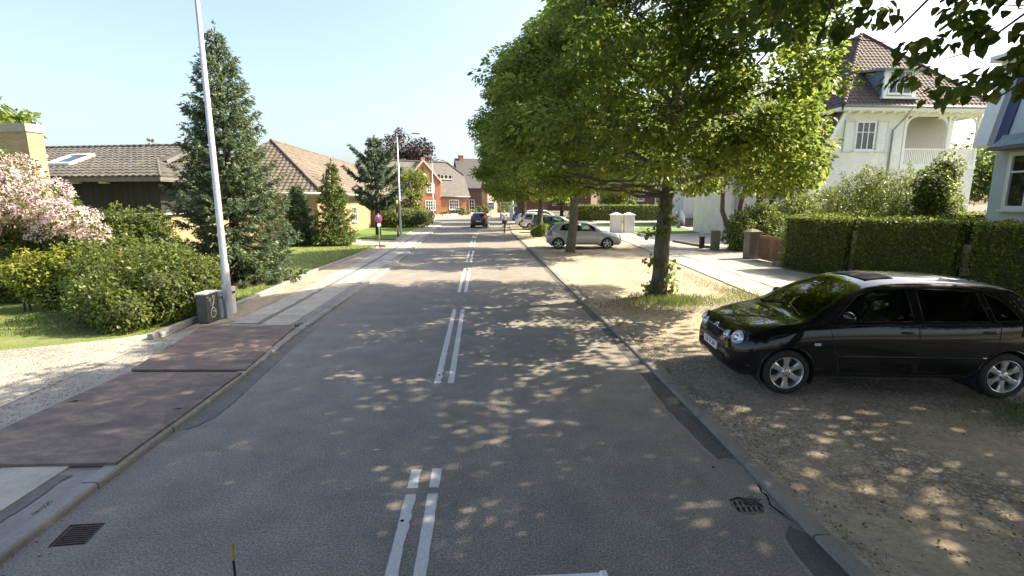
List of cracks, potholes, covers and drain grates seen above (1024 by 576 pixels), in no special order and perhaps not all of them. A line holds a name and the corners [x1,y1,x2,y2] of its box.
drain grate [730,498,764,515]
crack [756,483,792,521]
drain grate [49,524,104,547]
